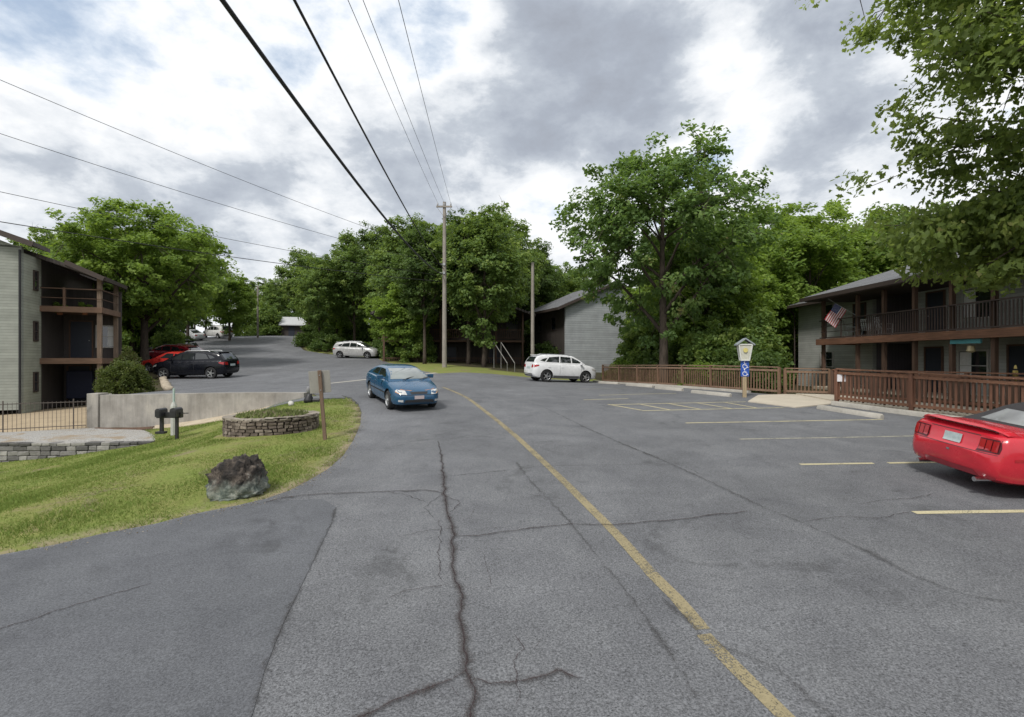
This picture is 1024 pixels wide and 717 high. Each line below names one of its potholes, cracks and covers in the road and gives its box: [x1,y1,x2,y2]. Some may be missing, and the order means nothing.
crack [263,442,743,717]
crack [2,582,153,628]
